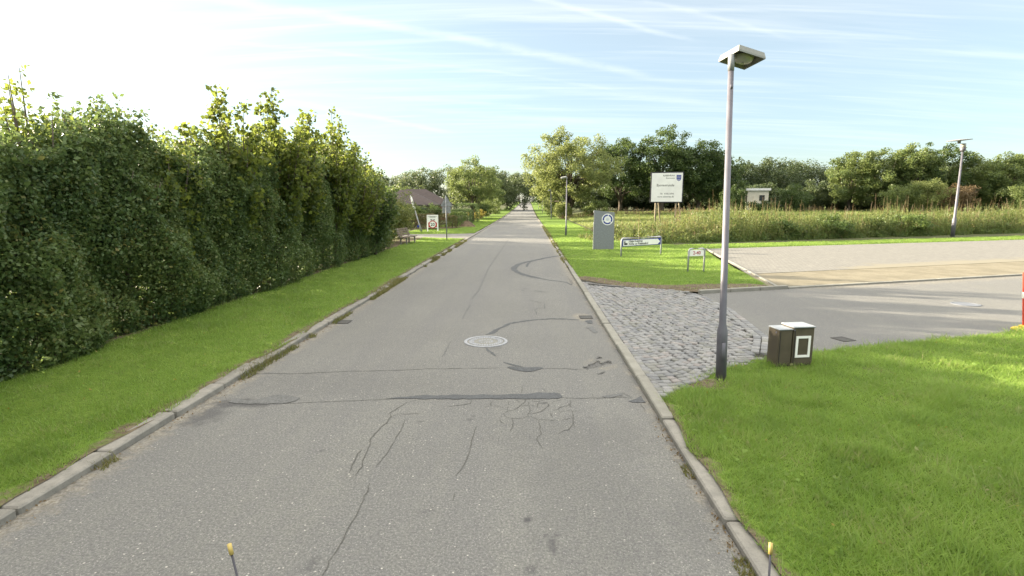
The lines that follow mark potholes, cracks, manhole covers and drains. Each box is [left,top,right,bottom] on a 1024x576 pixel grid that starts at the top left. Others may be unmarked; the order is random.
crack [270,399,414,576]
crack [488,391,644,447]
manhole cover [464,336,508,347]
